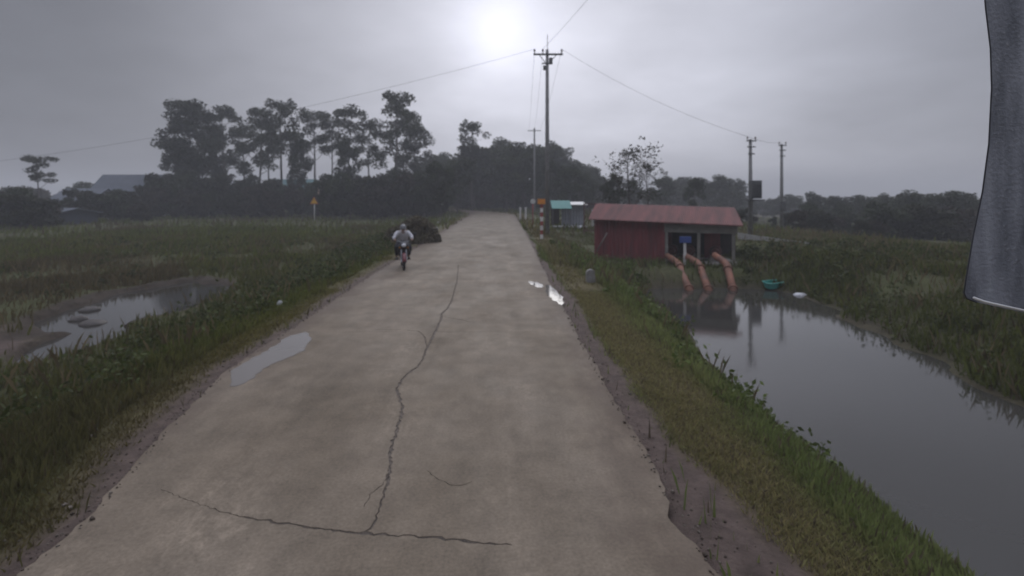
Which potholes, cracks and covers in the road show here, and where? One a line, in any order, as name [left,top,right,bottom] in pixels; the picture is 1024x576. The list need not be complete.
crack [163,271,511,545]
